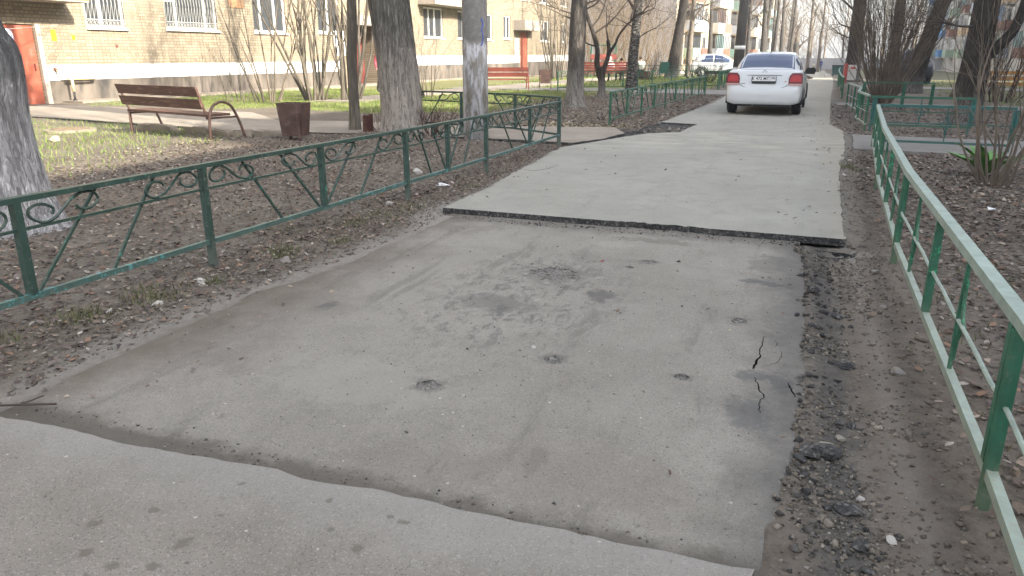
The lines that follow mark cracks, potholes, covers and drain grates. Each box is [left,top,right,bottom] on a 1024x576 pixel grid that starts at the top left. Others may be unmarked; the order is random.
crack [752,338,782,413]
pothole [544,355,563,364]
pothole [527,266,578,282]
pothole [415,380,442,391]
